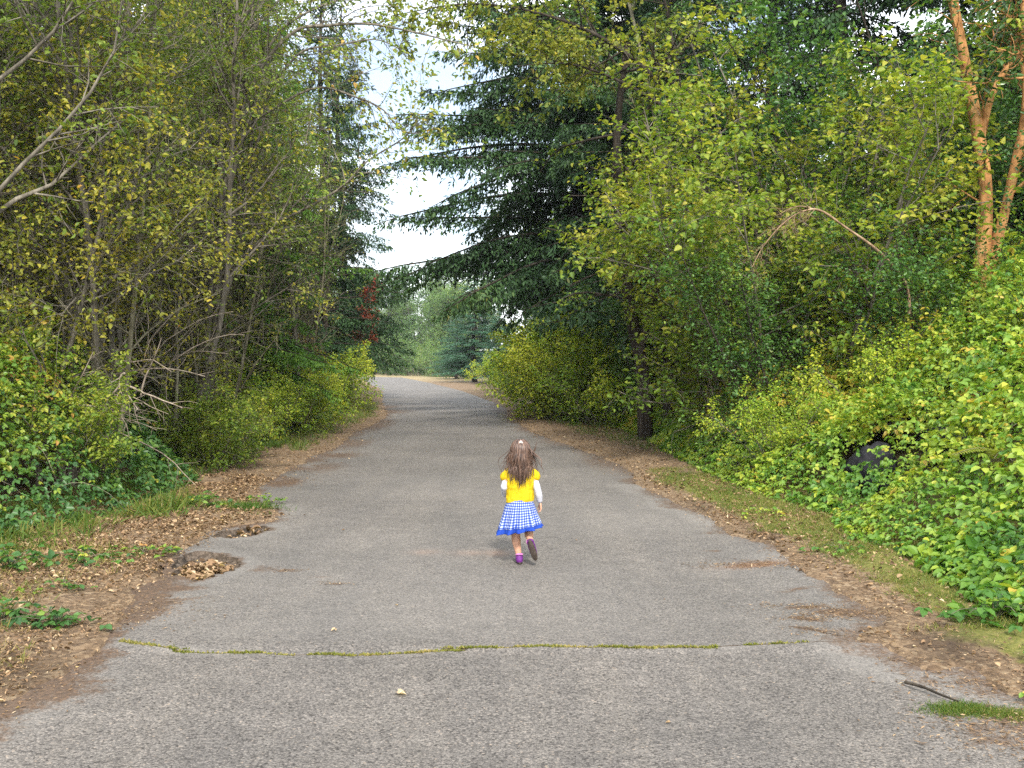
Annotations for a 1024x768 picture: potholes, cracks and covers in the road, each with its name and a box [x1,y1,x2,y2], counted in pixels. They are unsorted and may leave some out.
crack [114,626,843,657]
pothole [170,551,242,582]
pothole [211,525,273,538]
